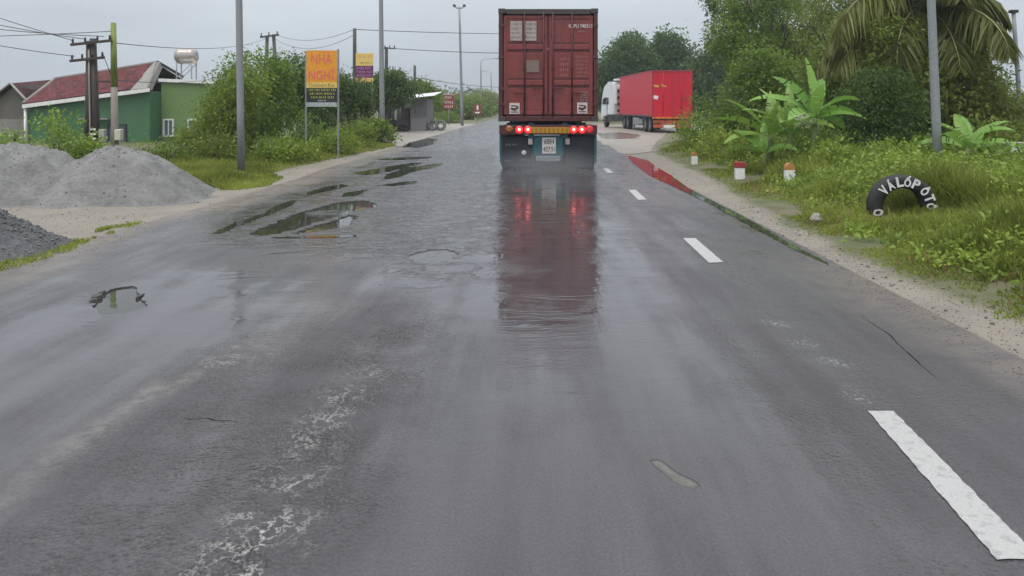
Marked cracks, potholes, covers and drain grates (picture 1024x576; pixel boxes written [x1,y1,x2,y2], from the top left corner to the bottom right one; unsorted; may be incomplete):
crack [862,316,939,380]
pothole [249,200,378,236]
pothole [89,286,148,316]
